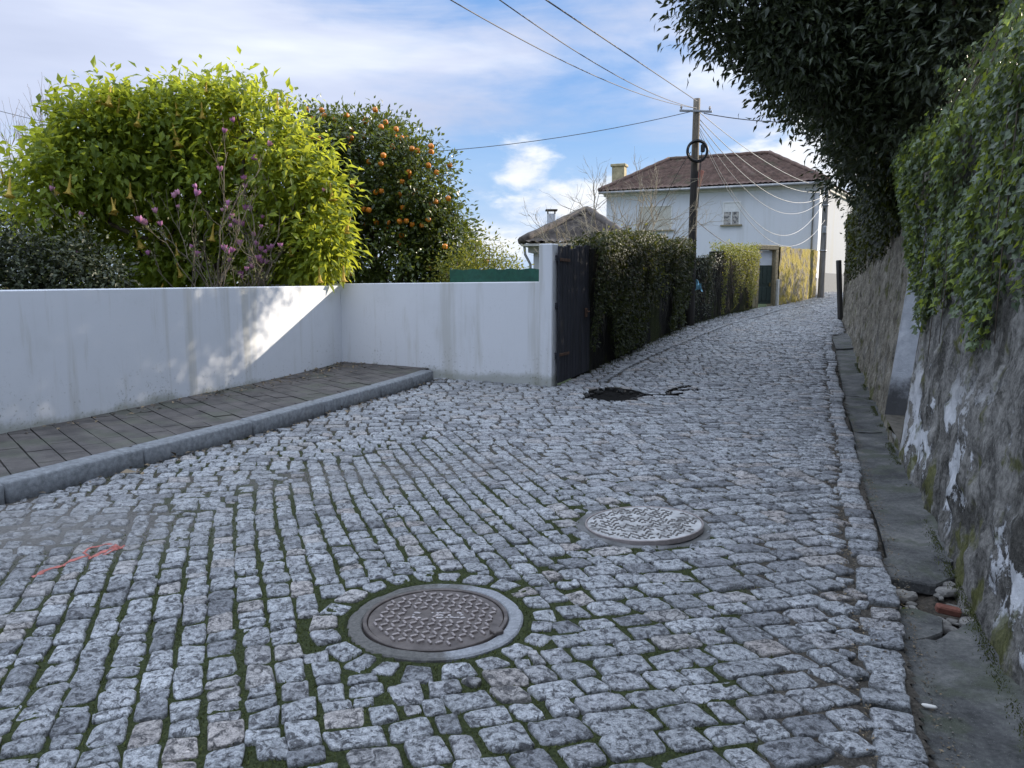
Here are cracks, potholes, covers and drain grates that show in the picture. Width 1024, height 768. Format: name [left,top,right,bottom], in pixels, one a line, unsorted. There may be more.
manhole cover [576,506,712,551]
manhole cover [347,584,523,663]
pothole [583,387,647,402]
